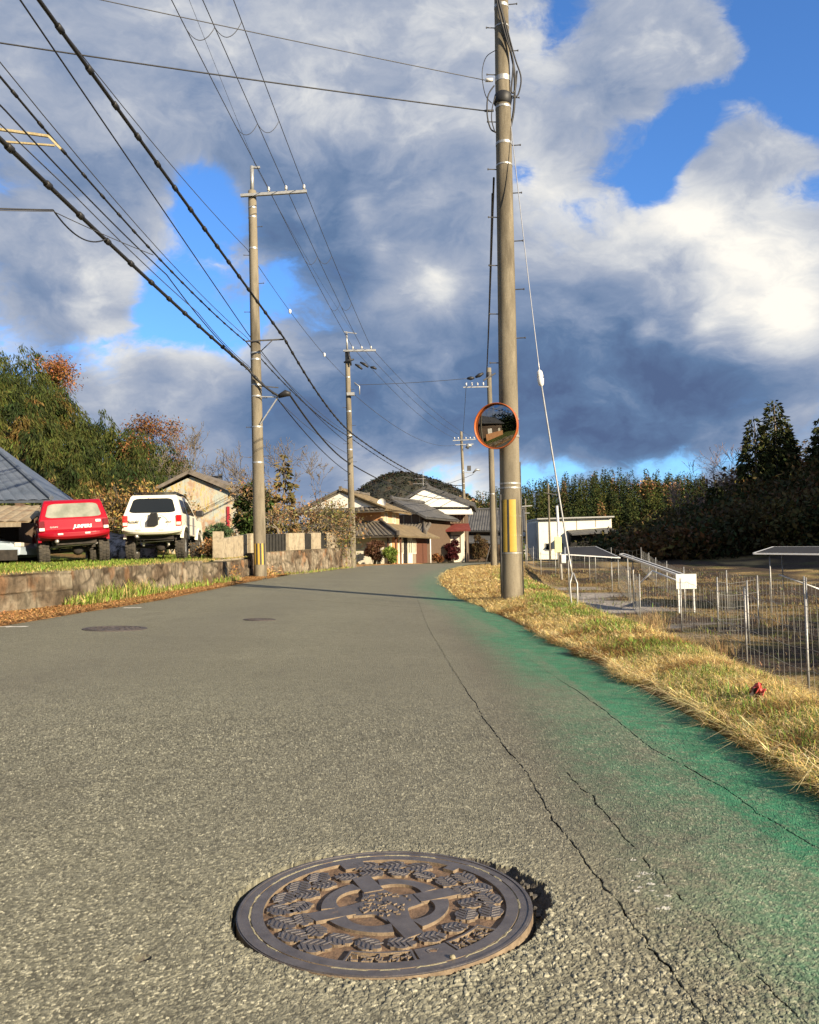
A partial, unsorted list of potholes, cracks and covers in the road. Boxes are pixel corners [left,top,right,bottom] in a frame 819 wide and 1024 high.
crack [531,660,819,849]
manhole cover [236,851,534,981]
crack [416,594,725,1012]
crack [567,773,806,1023]
